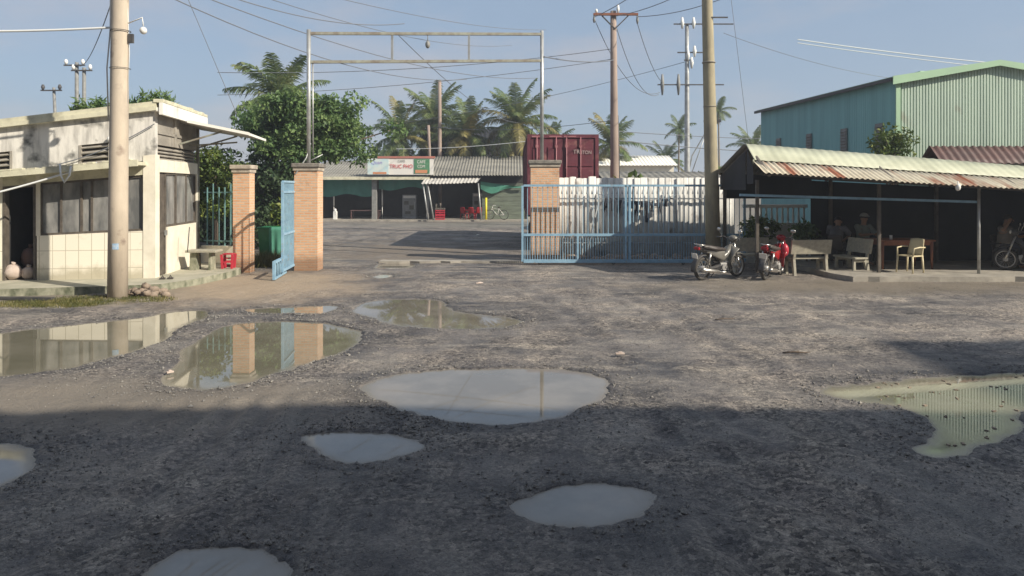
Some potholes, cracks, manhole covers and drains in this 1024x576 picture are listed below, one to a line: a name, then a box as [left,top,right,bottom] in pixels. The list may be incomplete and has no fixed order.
pothole [488,473,684,542]
pothole [343,297,532,331]
pothole [277,424,446,471]
pothole [0,433,57,497]
pothole [803,367,1024,464]
pothole [0,308,221,379]
pothole [146,319,374,394]
pothole [118,532,322,576]
pothole [345,363,625,429]
